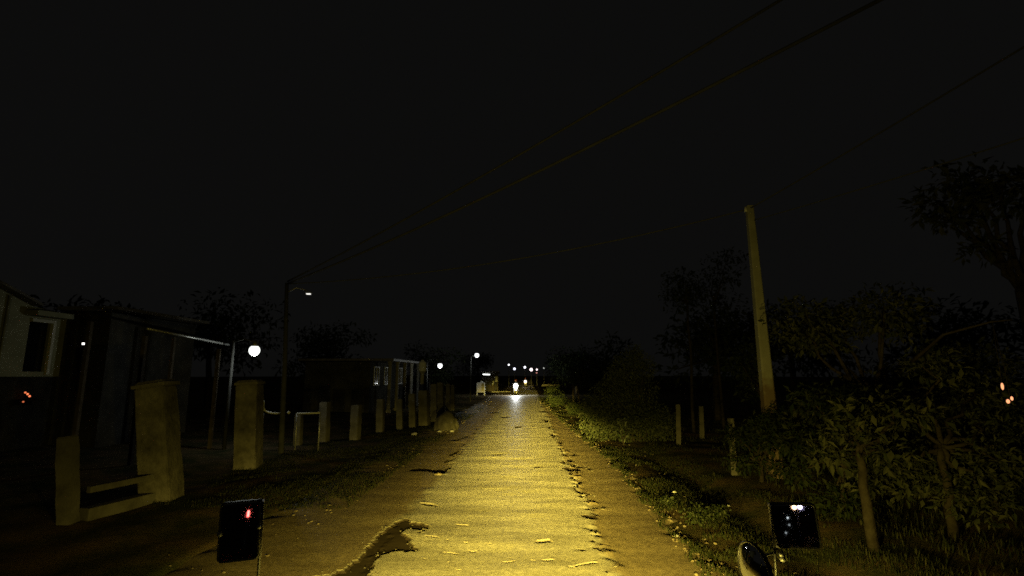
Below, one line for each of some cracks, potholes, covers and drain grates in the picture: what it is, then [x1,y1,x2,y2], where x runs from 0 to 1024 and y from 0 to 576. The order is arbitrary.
pothole [409,467,451,475]
pothole [315,518,430,576]
